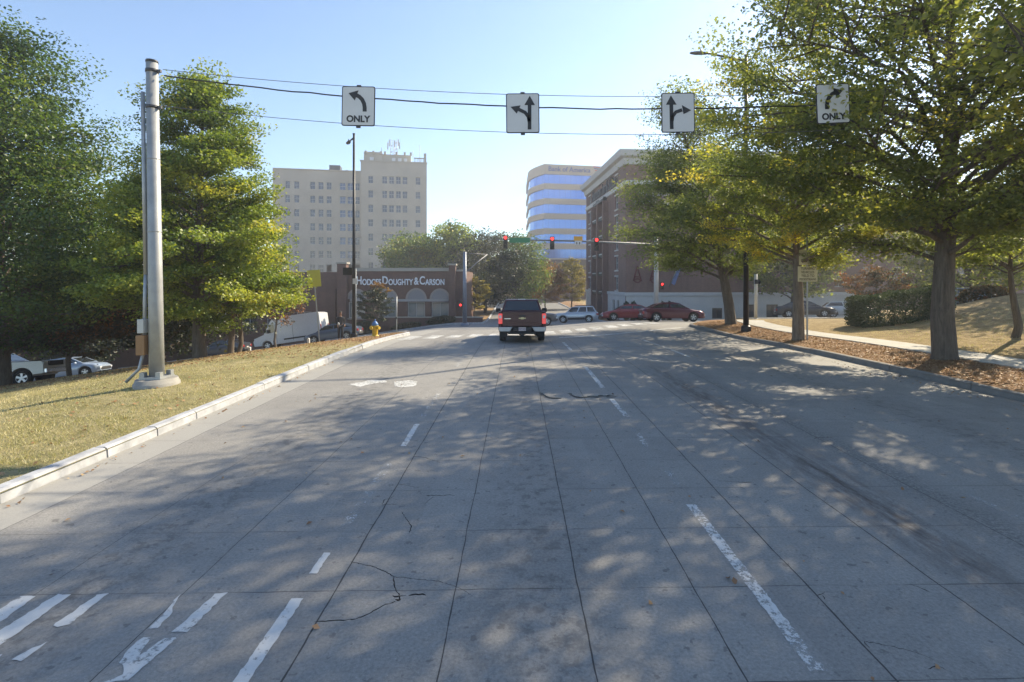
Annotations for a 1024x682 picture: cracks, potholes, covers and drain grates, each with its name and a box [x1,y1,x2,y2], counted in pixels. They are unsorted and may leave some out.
crack [316,562,474,622]
